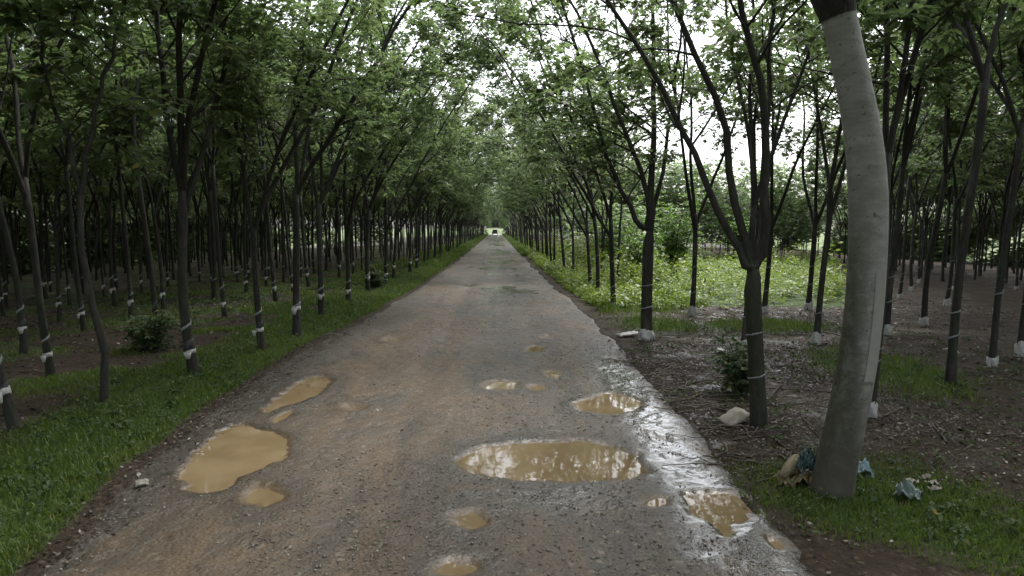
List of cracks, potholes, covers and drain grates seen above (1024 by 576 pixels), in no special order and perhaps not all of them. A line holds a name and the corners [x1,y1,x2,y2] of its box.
pothole [424,551,495,576]
pothole [171,420,299,495]
pothole [672,484,767,538]
pothole [567,390,650,415]
pothole [526,382,552,391]
pothole [450,435,659,484]
pothole [521,344,550,352]
pothole [235,478,298,509]
pothole [266,408,299,425]
pothole [541,368,566,379]
pothole [478,378,530,390]
